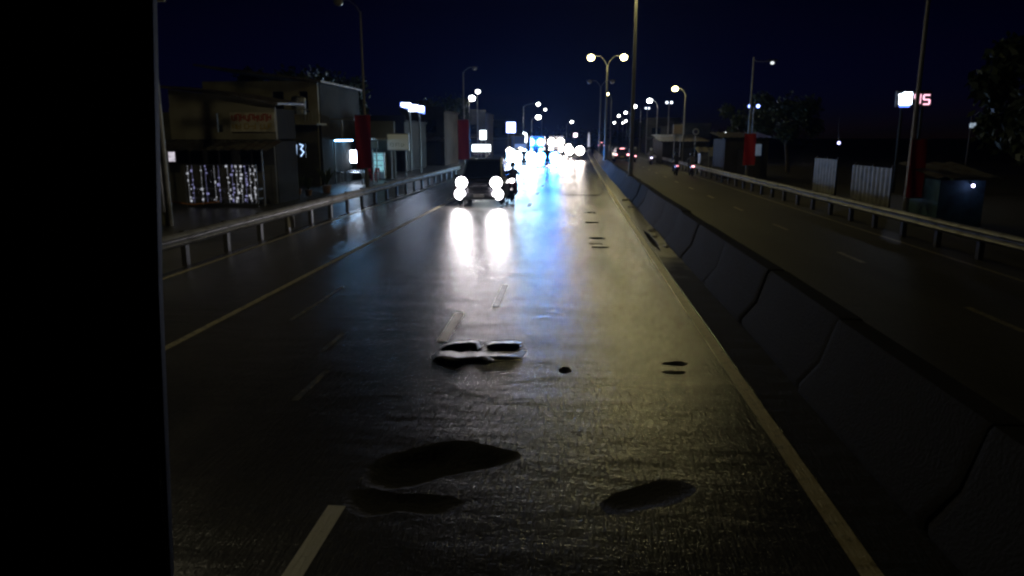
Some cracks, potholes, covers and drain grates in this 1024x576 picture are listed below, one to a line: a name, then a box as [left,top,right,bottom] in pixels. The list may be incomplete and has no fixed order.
pothole [439,340,485,353]
pothole [430,350,499,370]
pothole [362,440,522,491]
pothole [599,479,696,515]
pothole [340,488,465,518]
pothole [485,341,527,360]
